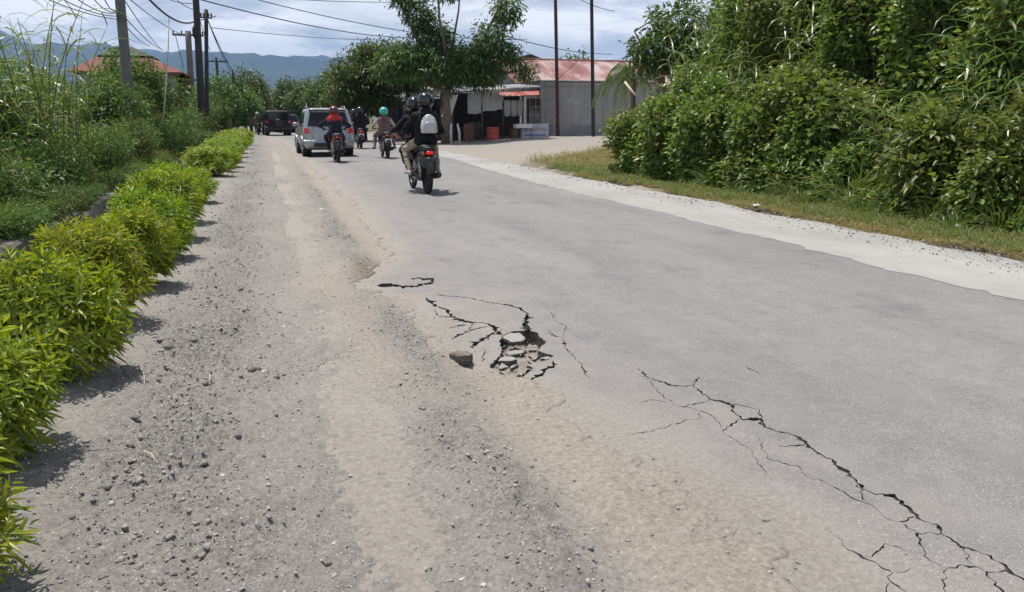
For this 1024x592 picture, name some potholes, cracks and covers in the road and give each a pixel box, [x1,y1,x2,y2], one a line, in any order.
pothole [426,293,556,380]
crack [377,277,435,289]
crack [548,312,587,376]
crack [633,366,1024,592]
